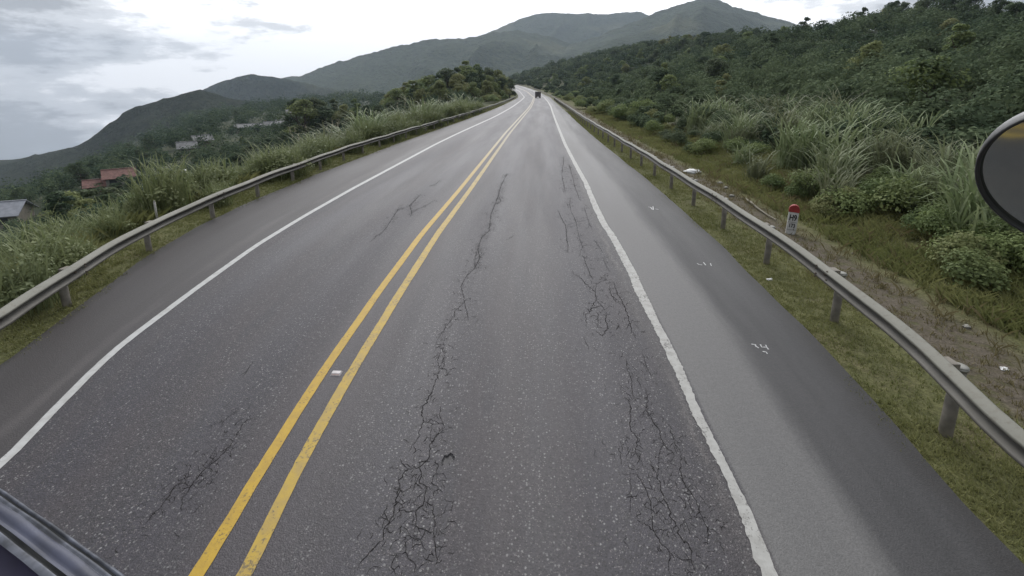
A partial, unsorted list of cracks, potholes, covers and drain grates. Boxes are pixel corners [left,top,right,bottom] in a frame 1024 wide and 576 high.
crack [113,405,264,556]
crack [558,158,642,350]
crack [357,173,511,574]
crack [594,355,724,576]
